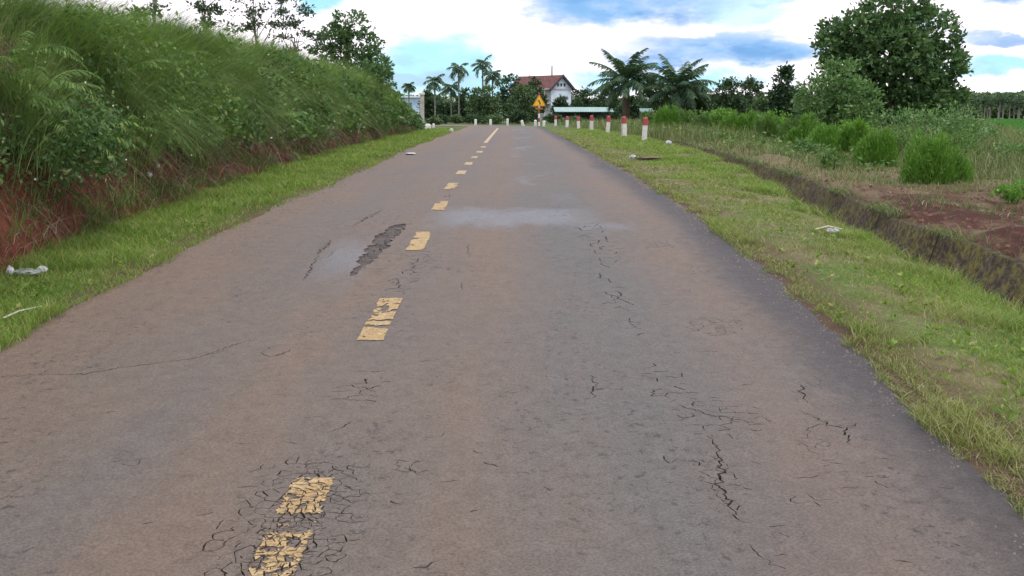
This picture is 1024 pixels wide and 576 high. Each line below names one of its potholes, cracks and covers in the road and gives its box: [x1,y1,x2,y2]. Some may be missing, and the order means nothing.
crack [327,370,391,402]
crack [790,381,900,506]
crack [202,456,403,576]
pothole [350,224,406,276]
crack [574,224,644,335]
crack [3,339,254,377]
crack [641,363,769,523]
